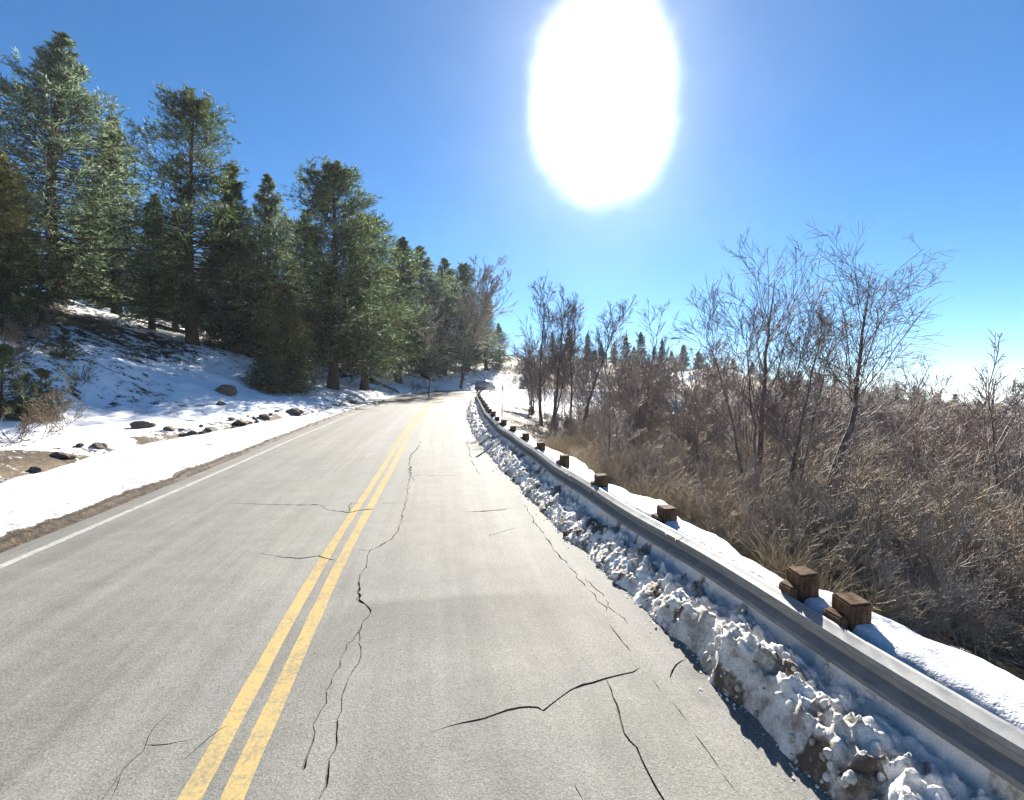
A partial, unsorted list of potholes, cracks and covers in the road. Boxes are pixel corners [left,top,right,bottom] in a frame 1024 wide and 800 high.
crack [102,717,216,800]
crack [434,505,734,800]
crack [301,441,452,800]
crack [241,503,370,513]
